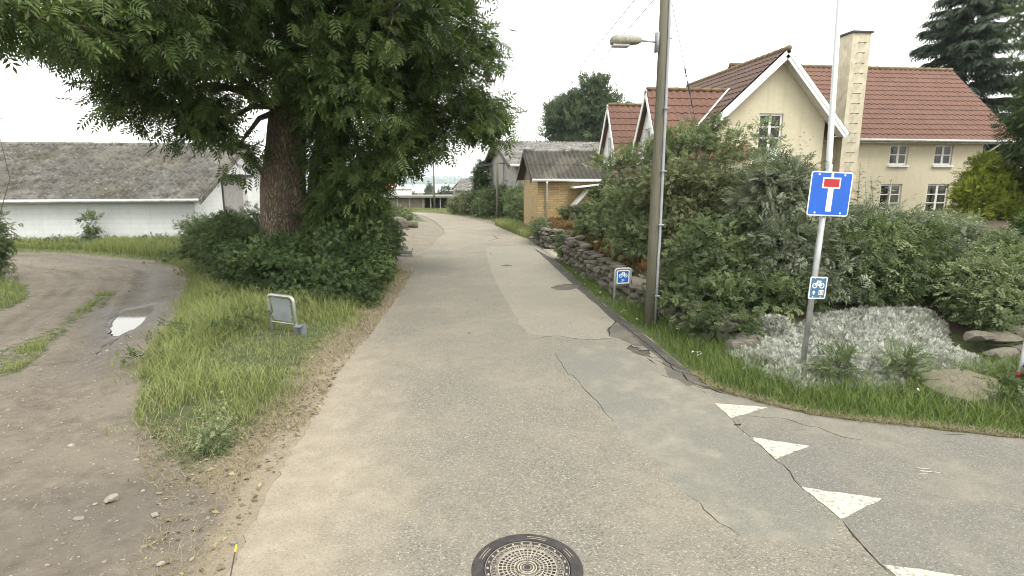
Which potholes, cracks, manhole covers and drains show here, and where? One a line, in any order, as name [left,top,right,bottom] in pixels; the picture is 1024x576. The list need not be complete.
crack [555,353,614,422]
manhole cover [472,534,583,576]
crack [608,320,737,397]
